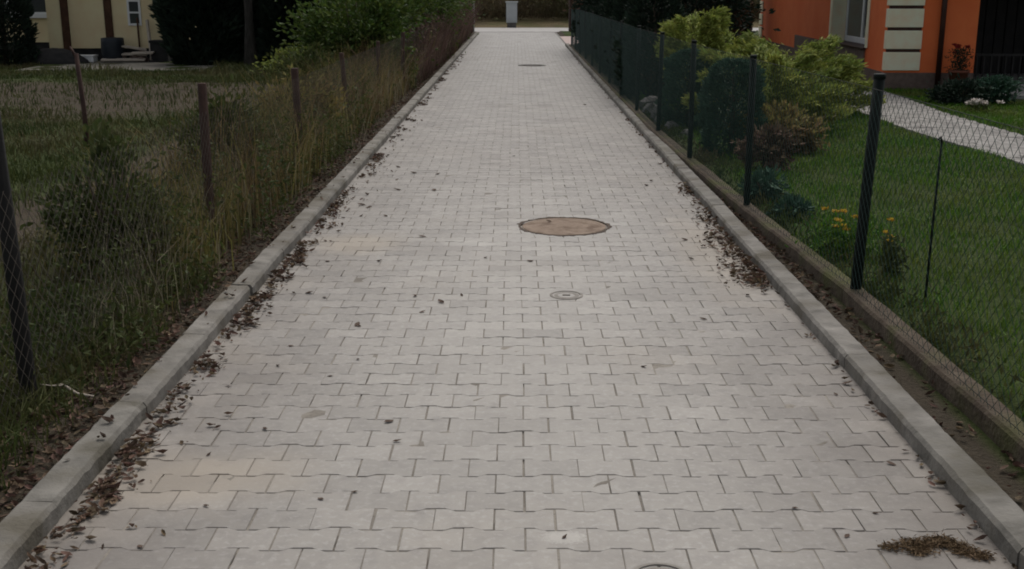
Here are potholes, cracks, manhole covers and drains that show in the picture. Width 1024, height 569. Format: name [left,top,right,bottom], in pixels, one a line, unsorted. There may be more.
utility cover [550,291,583,300]
manhole cover [517,217,612,237]
